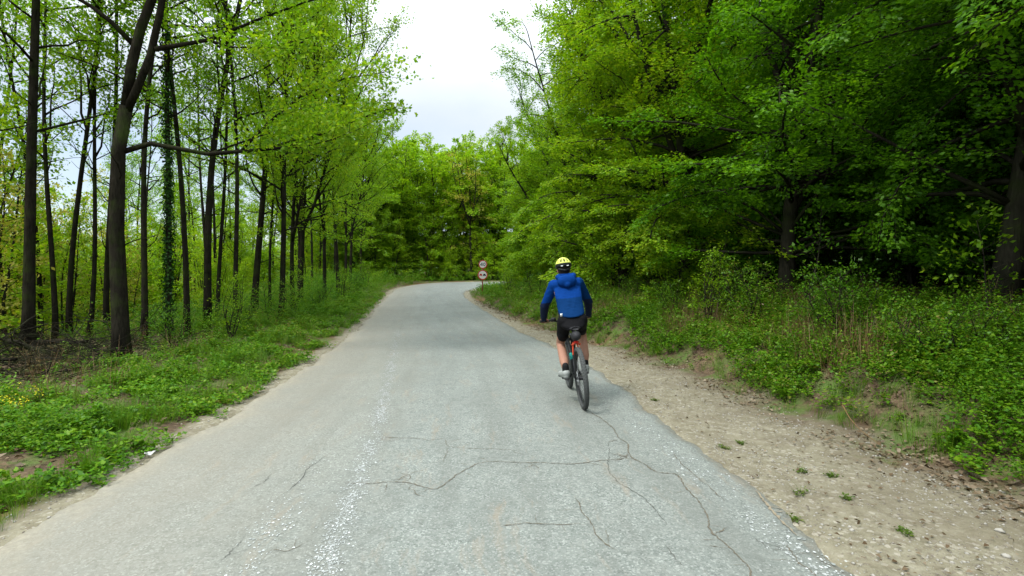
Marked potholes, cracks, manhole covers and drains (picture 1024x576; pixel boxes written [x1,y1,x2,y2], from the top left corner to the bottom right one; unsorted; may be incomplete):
crack [347,412,816,576]
